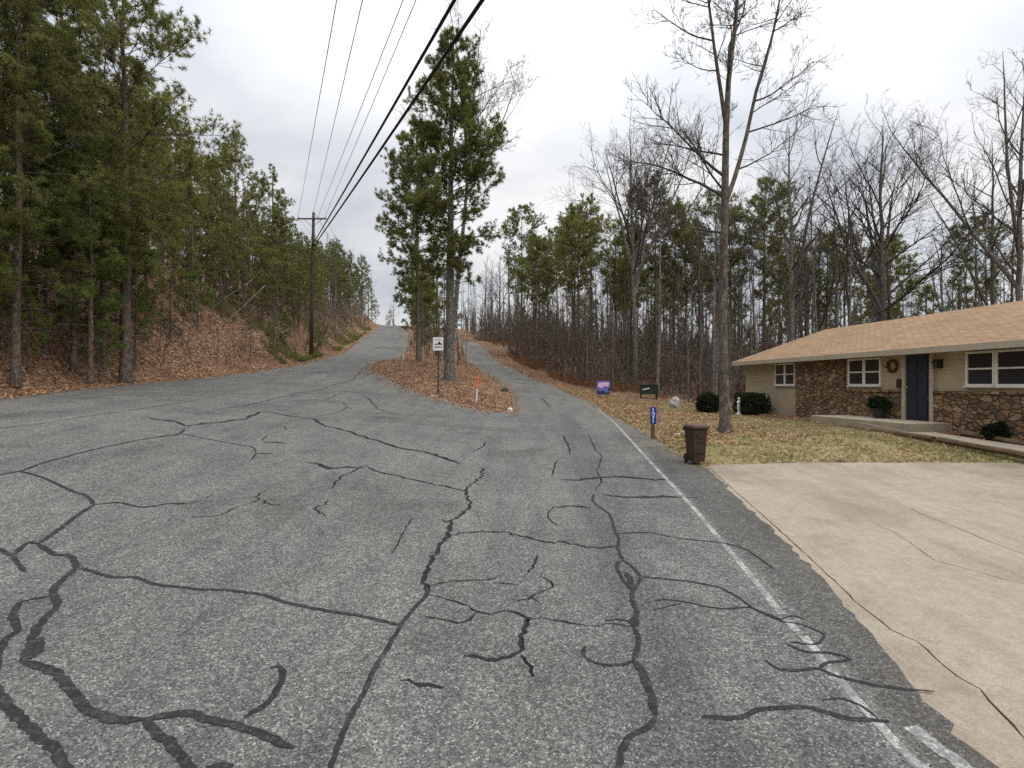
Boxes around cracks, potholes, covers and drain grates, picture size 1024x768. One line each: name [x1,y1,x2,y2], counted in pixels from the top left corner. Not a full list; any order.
crack [37,374,682,768]
